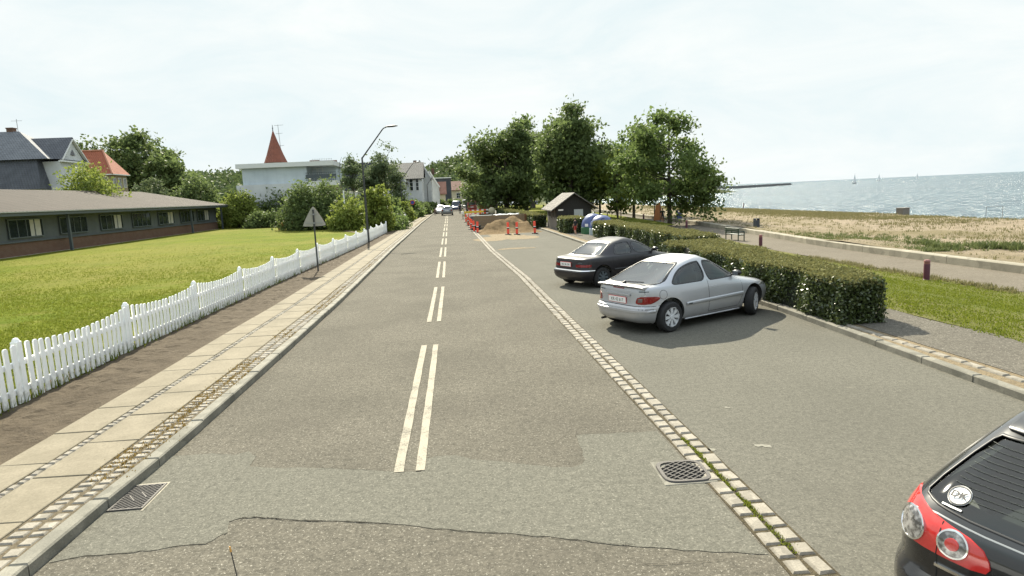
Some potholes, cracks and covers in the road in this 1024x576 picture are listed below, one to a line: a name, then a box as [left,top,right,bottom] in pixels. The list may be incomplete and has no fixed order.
drain grate [650,460,718,486]
drain grate [106,482,170,512]
crack [71,516,380,558]
